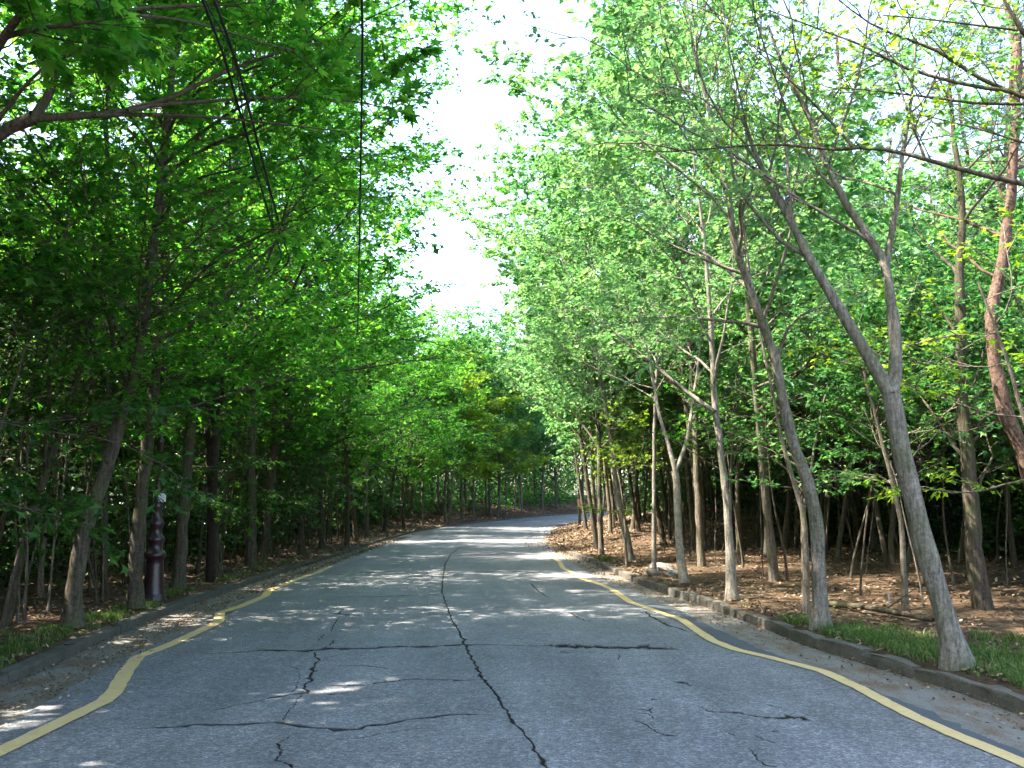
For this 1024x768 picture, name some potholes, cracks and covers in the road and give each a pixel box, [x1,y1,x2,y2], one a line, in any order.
crack [449,571,547,597]
crack [635,681,691,736]
crack [139,594,517,768]
crack [701,704,810,767]
